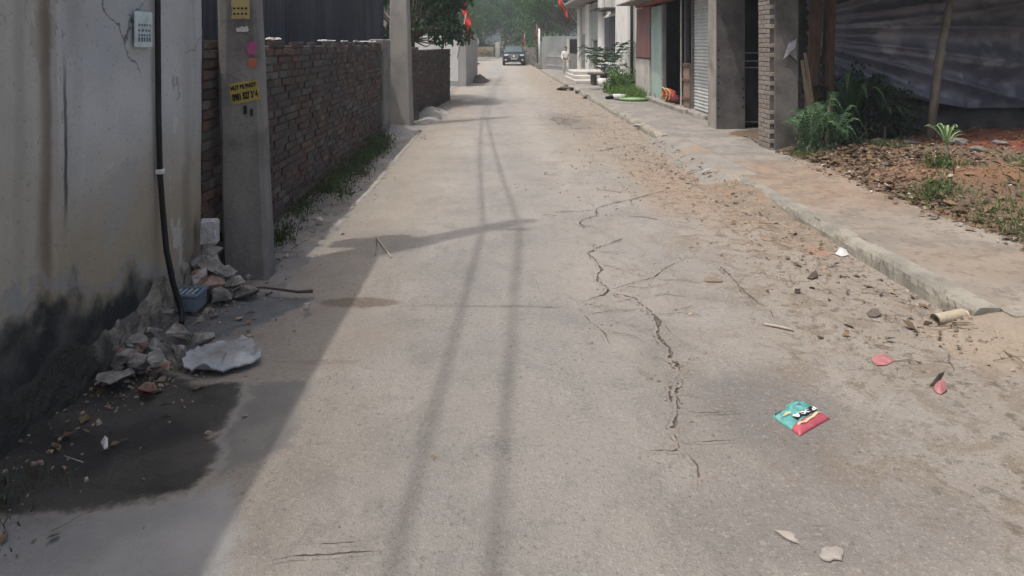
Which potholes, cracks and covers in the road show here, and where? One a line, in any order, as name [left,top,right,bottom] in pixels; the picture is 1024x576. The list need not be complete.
crack [398,190,778,491]
crack [259,538,379,567]
